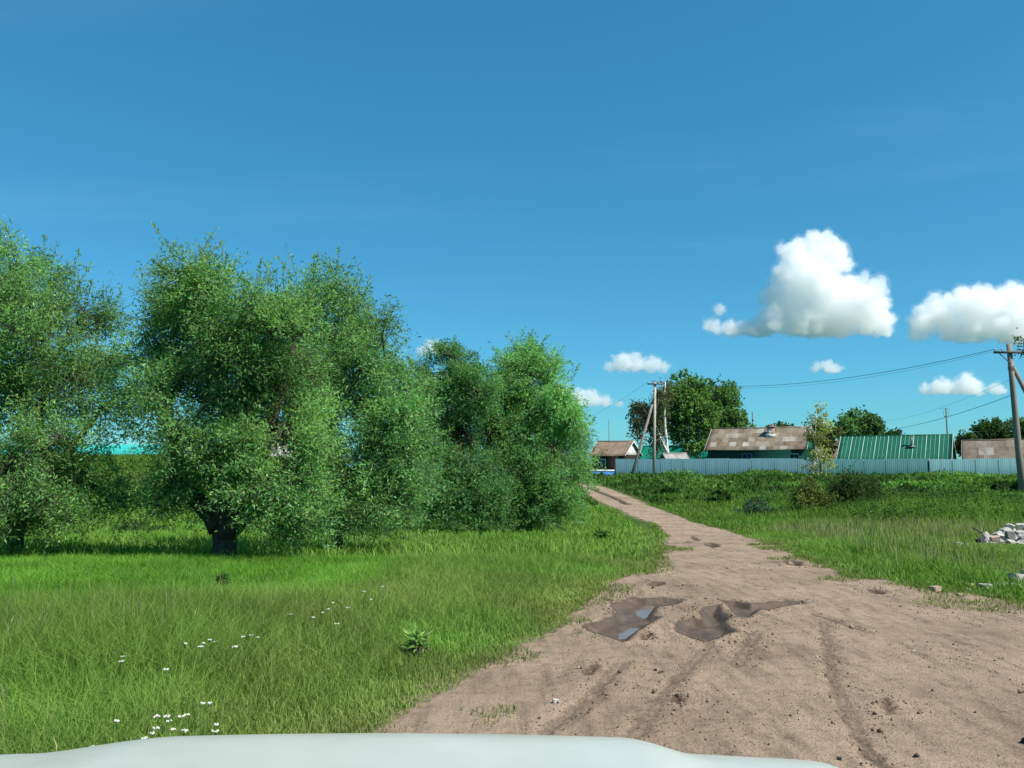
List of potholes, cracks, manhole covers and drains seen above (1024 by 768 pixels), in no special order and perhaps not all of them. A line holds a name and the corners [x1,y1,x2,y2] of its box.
pothole [583,597,683,642]
pothole [674,604,737,642]
pothole [722,600,805,618]
